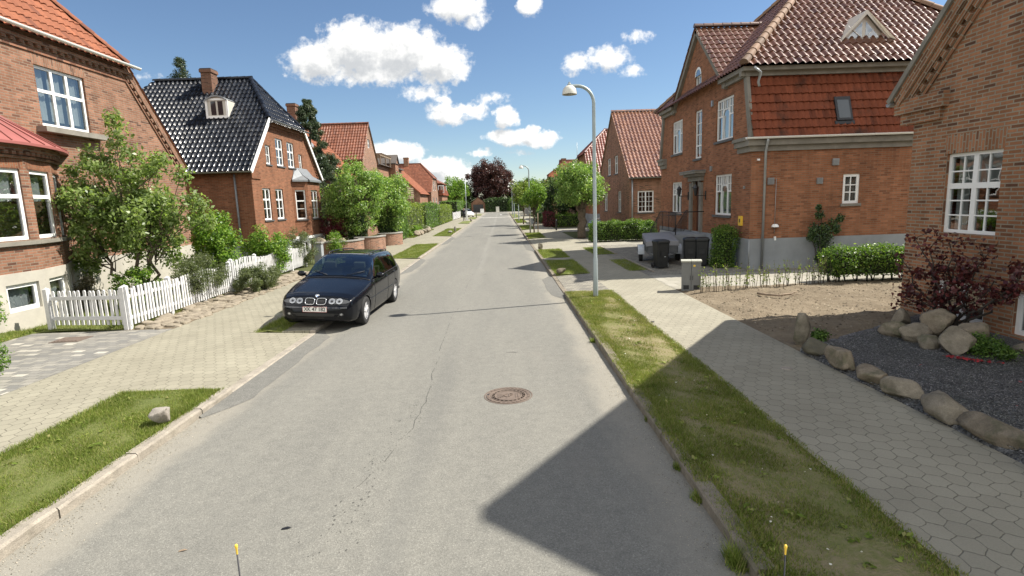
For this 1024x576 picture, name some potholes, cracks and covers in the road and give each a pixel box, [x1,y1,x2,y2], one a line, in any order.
crack [298,309,458,557]
manhole cover [484,387,533,404]
